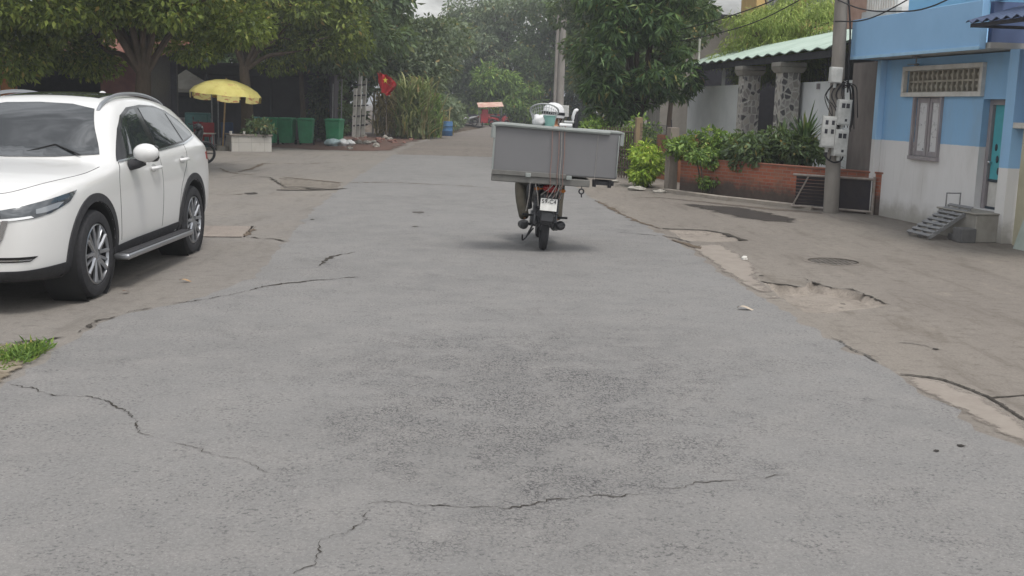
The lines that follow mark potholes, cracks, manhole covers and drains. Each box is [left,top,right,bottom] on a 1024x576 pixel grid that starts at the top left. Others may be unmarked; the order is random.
pothole [765,282,887,314]
pothole [669,230,742,242]
manhole cover [803,257,863,266]
crack [11,382,152,436]
crack [834,338,878,362]
crack [297,493,642,571]
crack [173,252,352,304]
